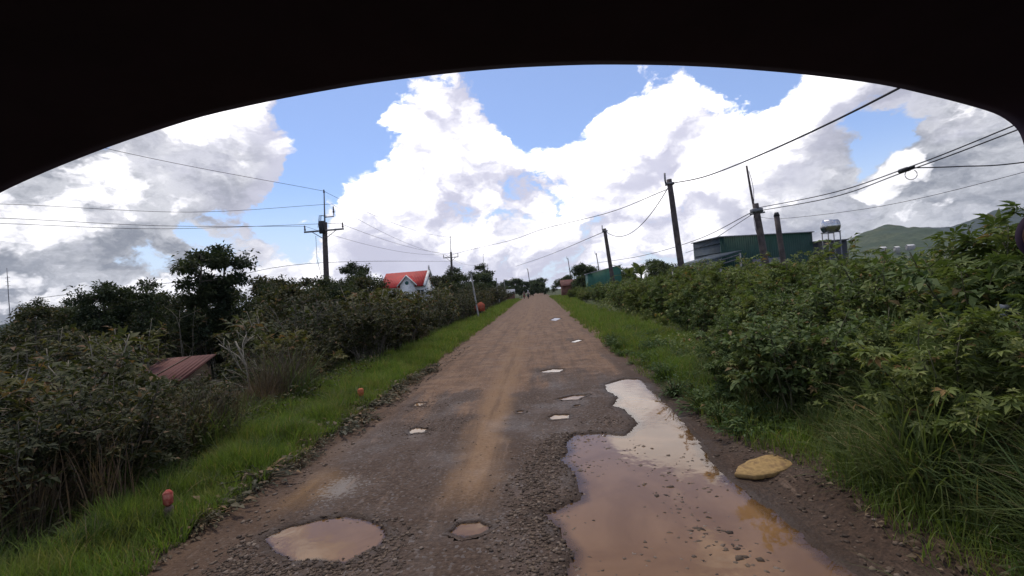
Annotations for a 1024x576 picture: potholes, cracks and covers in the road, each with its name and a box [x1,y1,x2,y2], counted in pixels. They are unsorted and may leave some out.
pothole [251,509,401,570]
pothole [442,517,499,541]
pothole [404,425,433,435]
pothole [520,376,887,576]
